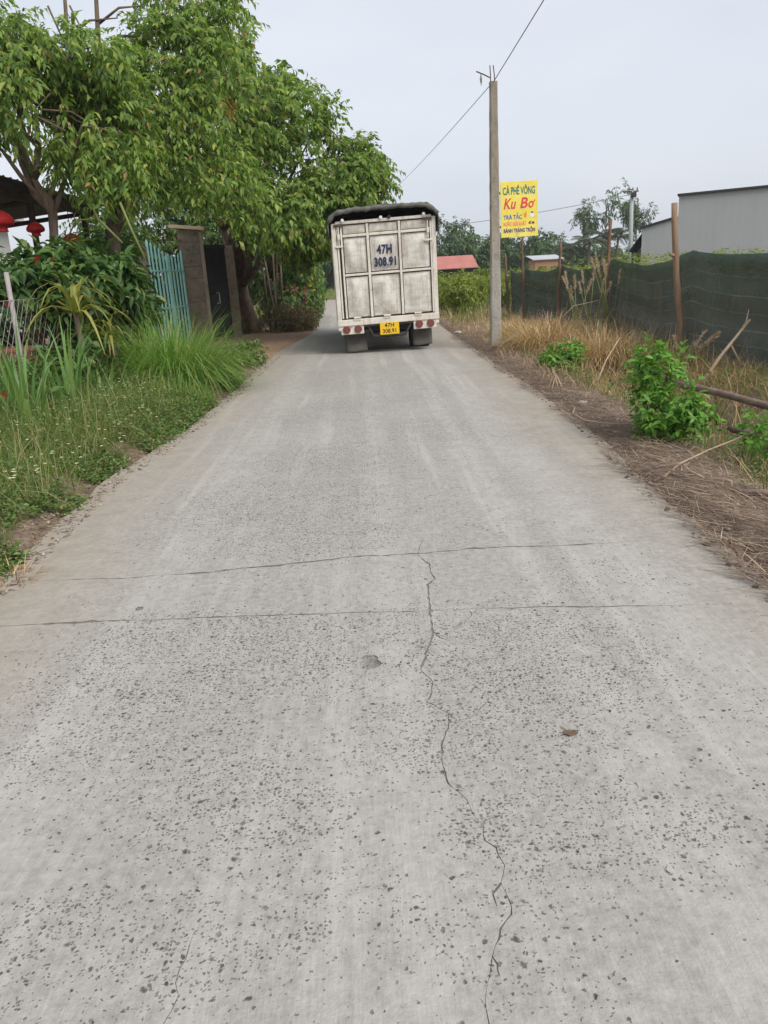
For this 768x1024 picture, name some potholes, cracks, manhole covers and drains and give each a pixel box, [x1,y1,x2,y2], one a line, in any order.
crack [12,540,728,1024]
pothole [362,655,381,670]
